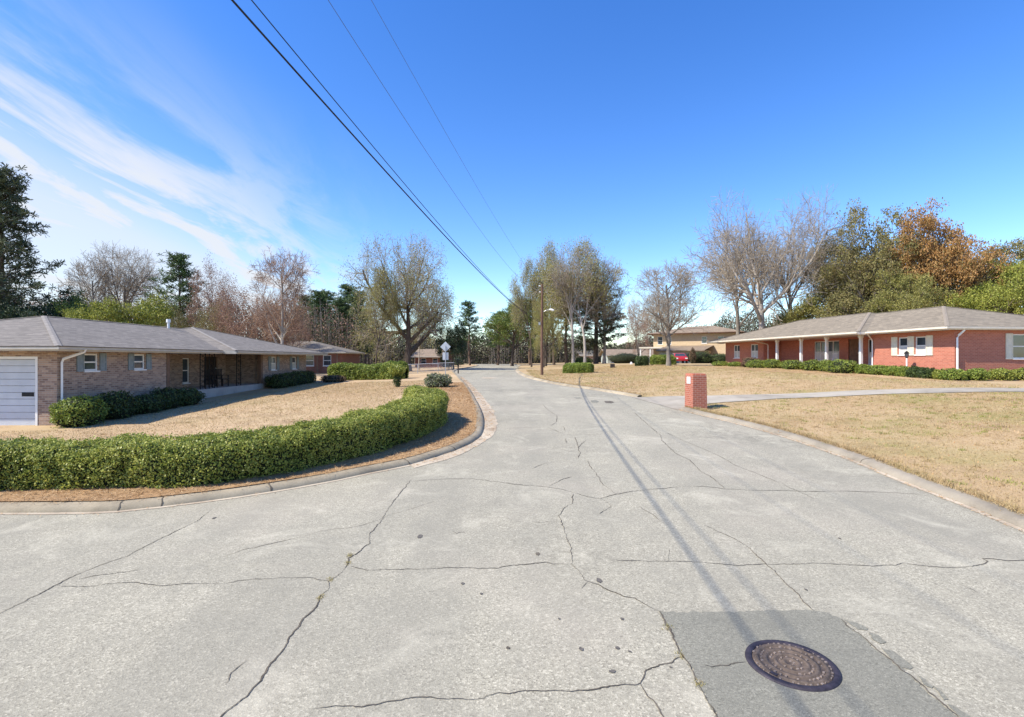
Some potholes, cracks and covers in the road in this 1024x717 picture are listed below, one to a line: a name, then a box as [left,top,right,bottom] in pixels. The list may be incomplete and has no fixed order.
manhole cover [745,640,842,692]
crack [2,407,913,717]
crack [624,527,1019,611]
crack [841,619,959,717]
